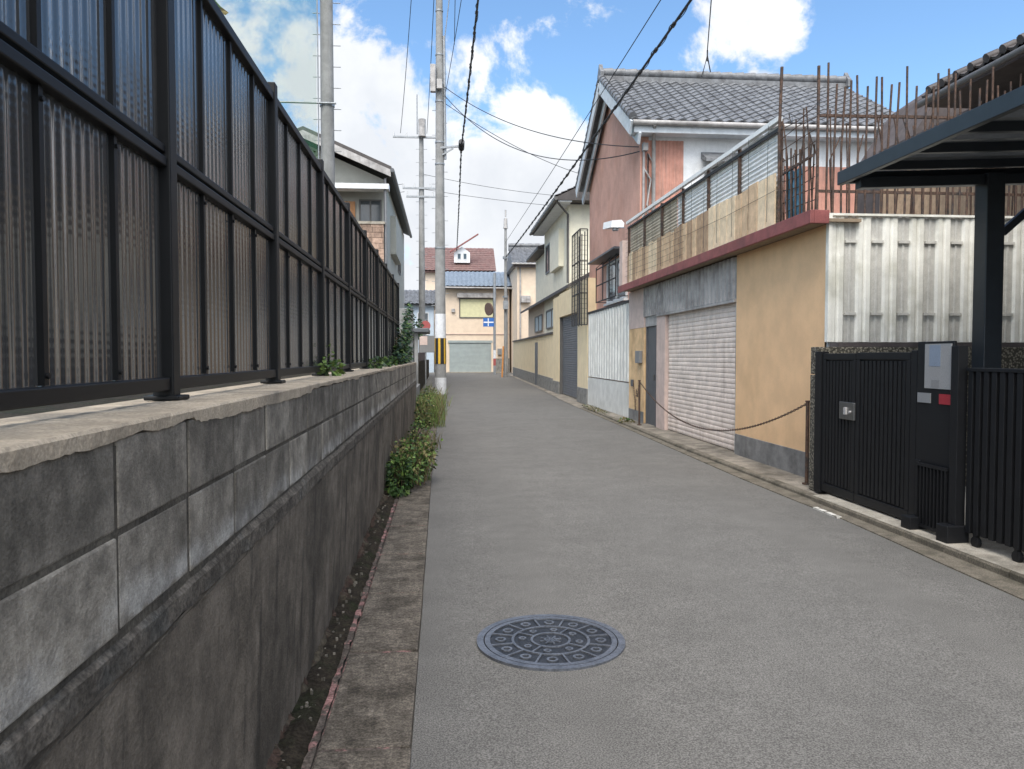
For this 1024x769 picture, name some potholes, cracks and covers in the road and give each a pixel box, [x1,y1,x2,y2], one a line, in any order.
manhole cover [477,614,625,672]
